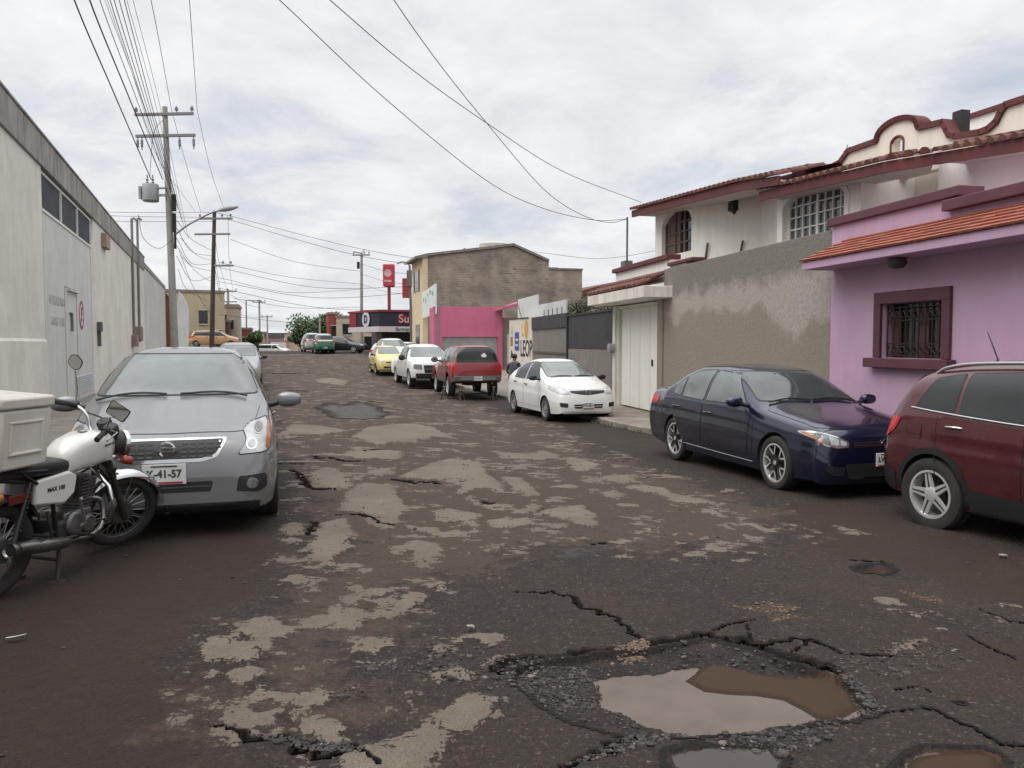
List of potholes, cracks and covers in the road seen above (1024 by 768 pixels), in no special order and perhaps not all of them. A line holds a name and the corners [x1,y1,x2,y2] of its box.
crack [209,724,382,764]
crack [559,736,638,768]
crack [968,609,1024,660]
crack [278,449,386,490]
pothole [502,638,883,739]
pothole [885,743,1014,768]
crack [883,685,1024,748]
pothole [849,563,900,576]
crack [305,513,394,536]
pothole [658,739,794,768]
crack [487,590,895,709]
